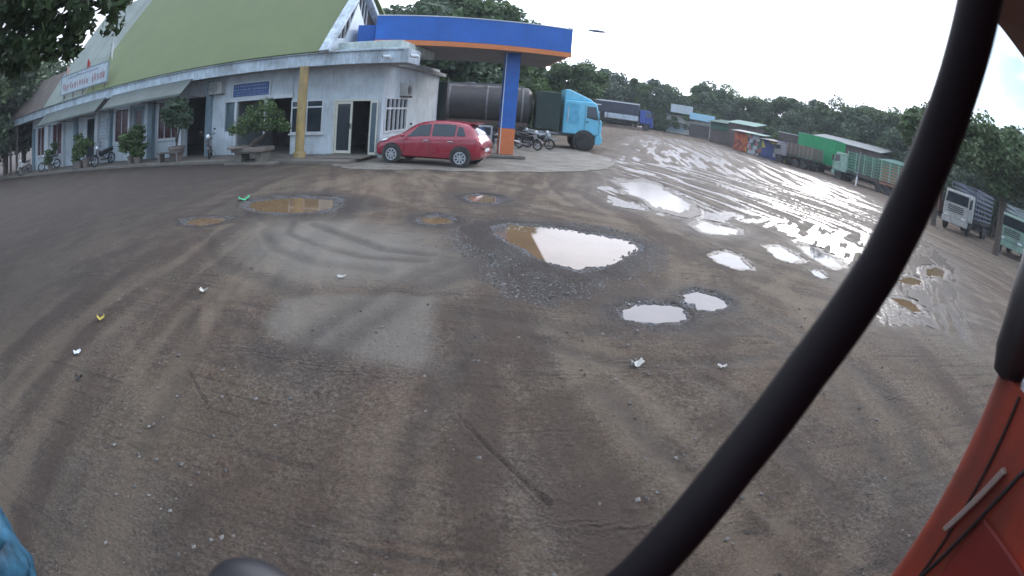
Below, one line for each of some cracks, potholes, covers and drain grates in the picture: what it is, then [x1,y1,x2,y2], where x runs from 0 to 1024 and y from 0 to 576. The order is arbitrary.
pothole [238,193,348,216]
pothole [427,217,688,288]
pothole [178,214,235,227]
pothole [922,265,949,279]
pothole [612,293,704,331]
pothole [411,213,464,225]
pothole [707,249,757,271]
pothole [459,193,508,204]
pothole [667,288,735,313]
pothole [613,178,701,219]
pothole [888,294,928,314]
